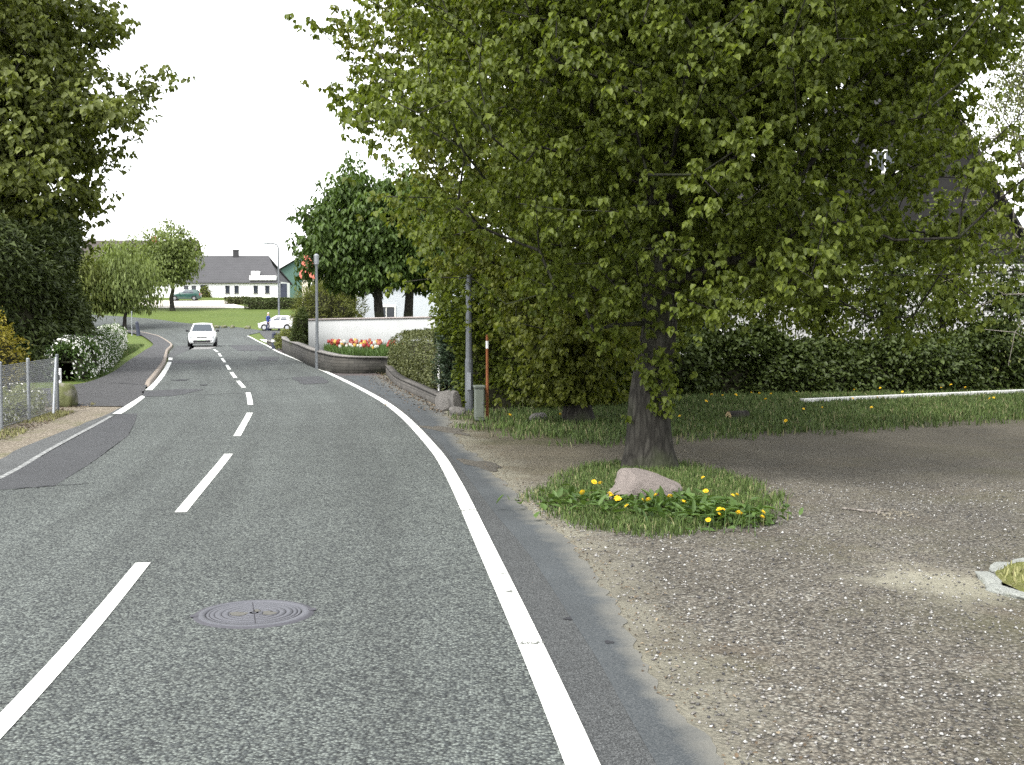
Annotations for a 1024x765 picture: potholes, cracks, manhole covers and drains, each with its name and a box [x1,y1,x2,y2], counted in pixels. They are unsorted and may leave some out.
manhole cover [190,600,316,629]
